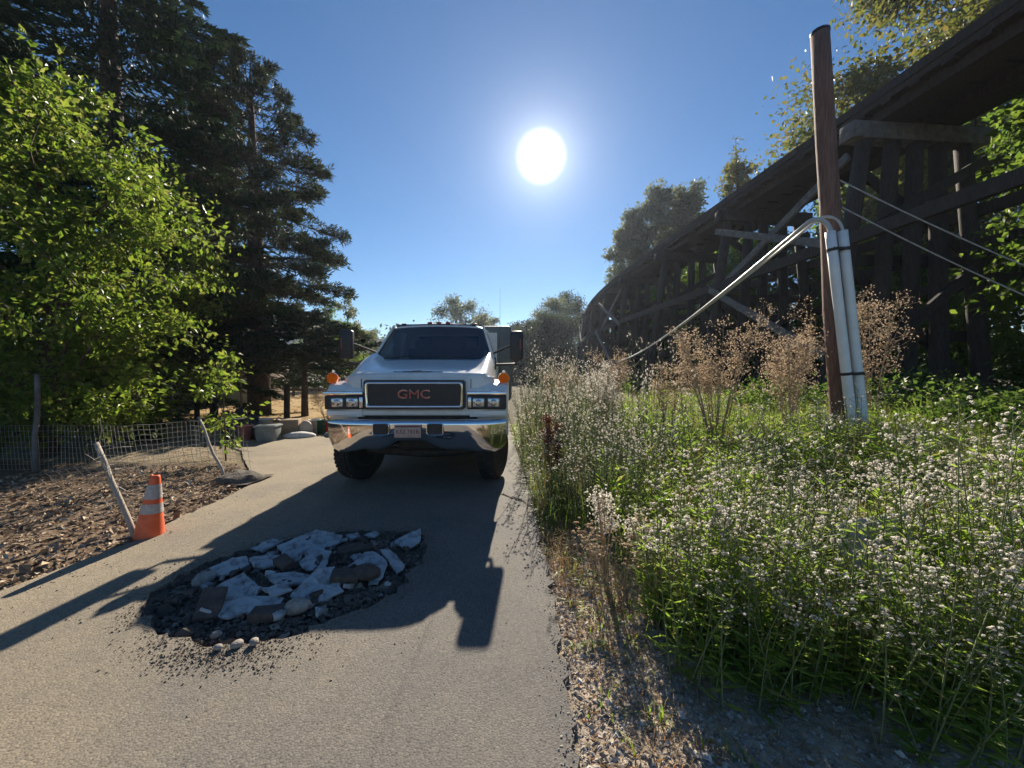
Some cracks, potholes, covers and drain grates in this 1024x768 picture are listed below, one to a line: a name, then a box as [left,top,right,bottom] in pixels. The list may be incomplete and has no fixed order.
pothole [137,530,428,647]
